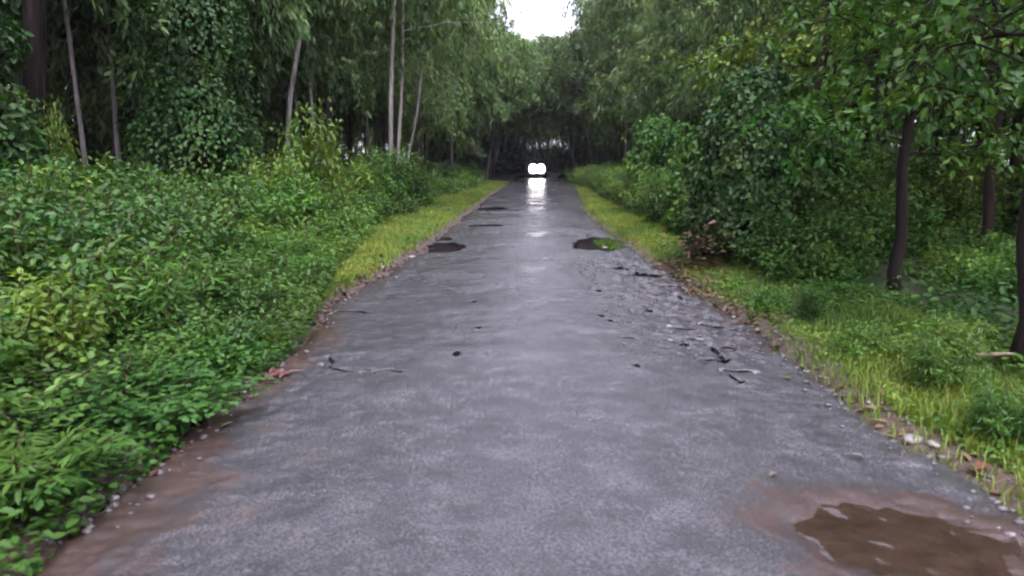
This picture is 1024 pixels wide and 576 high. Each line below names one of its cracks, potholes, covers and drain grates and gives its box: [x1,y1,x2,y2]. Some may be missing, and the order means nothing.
pothole [447,350,466,359]
crack [665,322,755,383]
crack [320,356,401,376]
pothole [569,237,632,253]
pothole [427,242,470,253]
pothole [748,489,1024,576]
